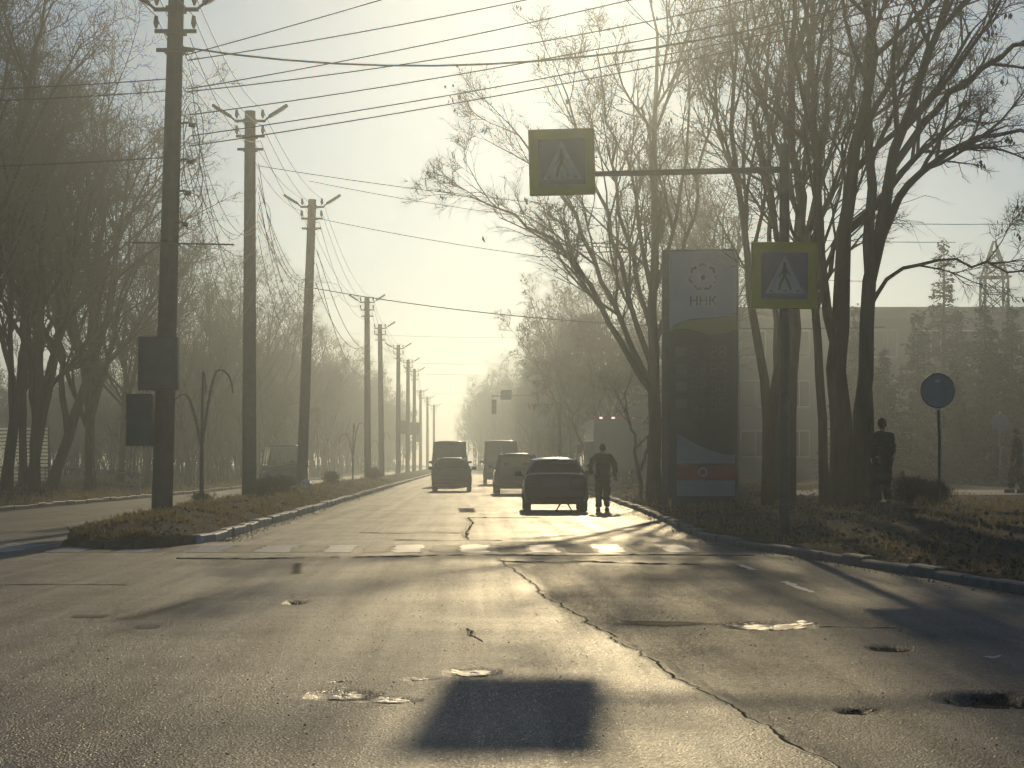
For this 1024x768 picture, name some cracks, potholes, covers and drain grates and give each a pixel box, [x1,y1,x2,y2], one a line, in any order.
pothole [944,692,1024,709]
crack [466,628,482,641]
